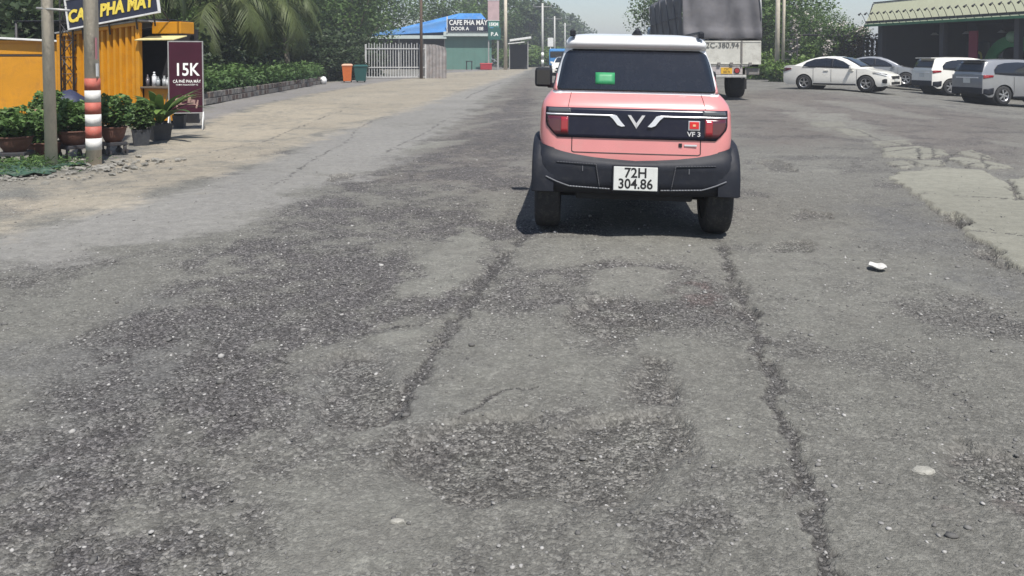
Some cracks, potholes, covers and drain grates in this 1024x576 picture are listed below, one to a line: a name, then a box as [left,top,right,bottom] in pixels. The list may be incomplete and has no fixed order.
pothole [382,408,707,516]
crack [358,226,539,423]
crack [707,244,854,576]
